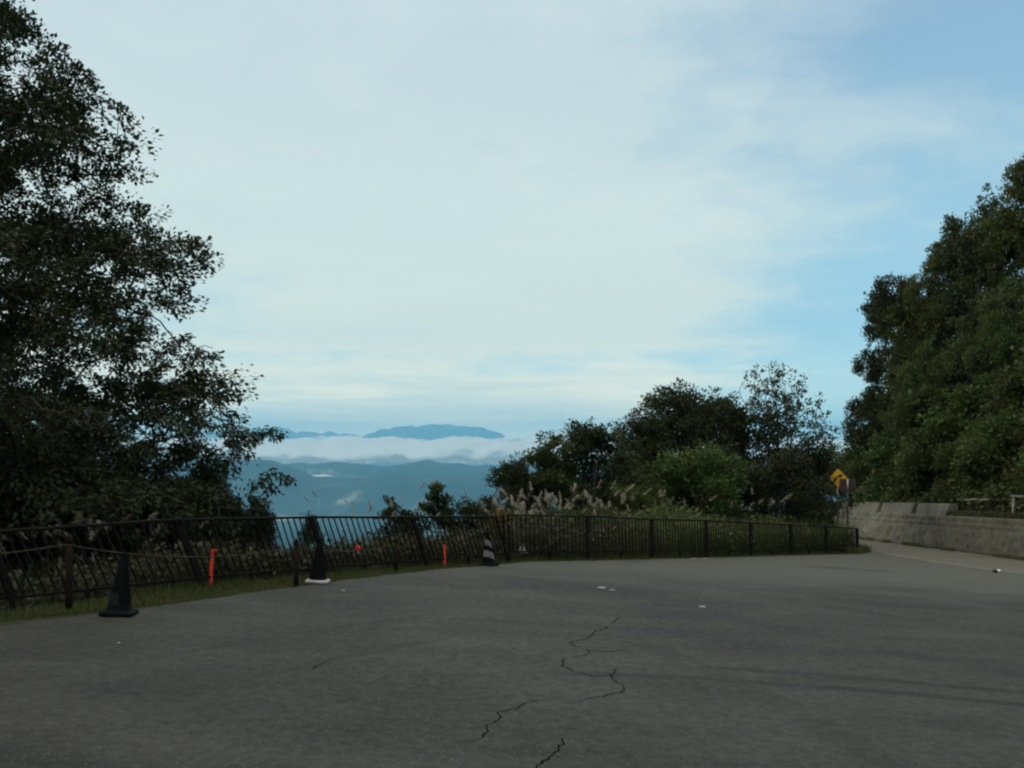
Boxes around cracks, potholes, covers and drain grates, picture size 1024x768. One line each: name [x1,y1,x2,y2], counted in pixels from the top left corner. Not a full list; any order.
crack [535,737,565,768]
crack [473,617,625,741]
